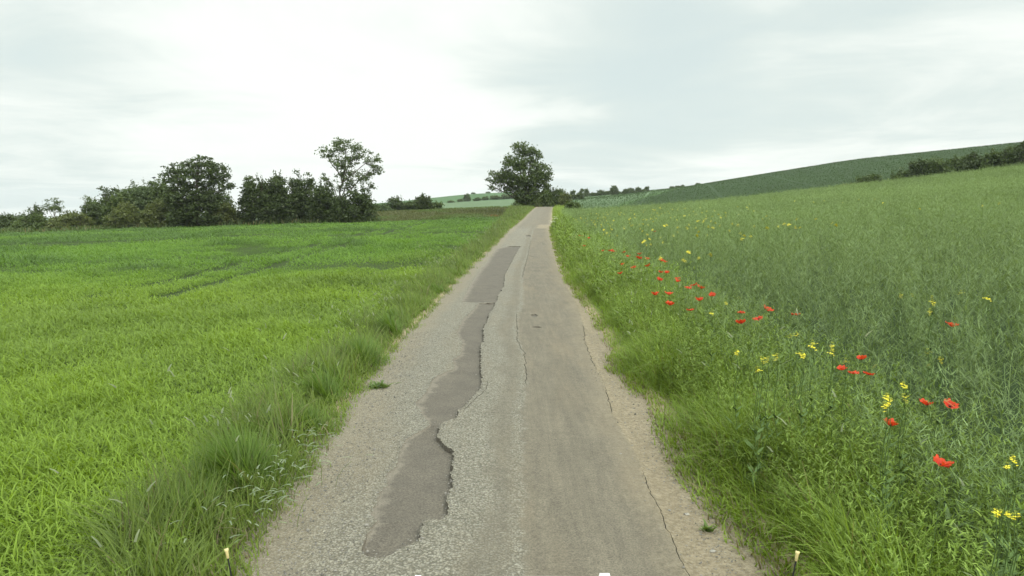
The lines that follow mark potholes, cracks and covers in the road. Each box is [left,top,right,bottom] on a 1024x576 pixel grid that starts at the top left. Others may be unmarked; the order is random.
crack [643,473,690,576]
